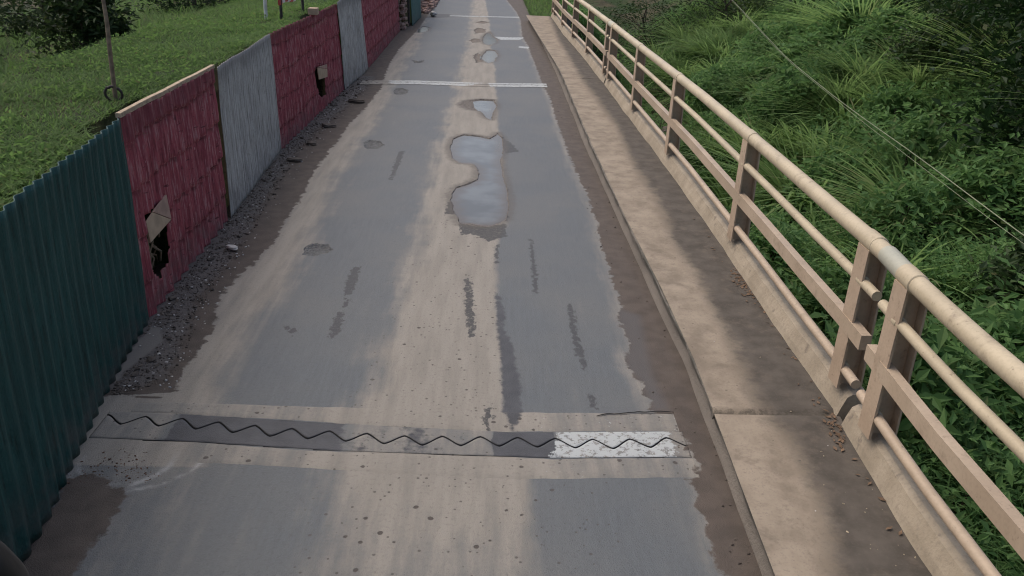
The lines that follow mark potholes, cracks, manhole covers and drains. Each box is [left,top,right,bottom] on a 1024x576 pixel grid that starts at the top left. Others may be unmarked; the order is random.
pothole [482,32,498,45]
pothole [458,99,498,120]
pothole [363,140,385,149]
pothole [480,50,498,63]
pothole [450,133,509,227]
pothole [302,243,334,256]
